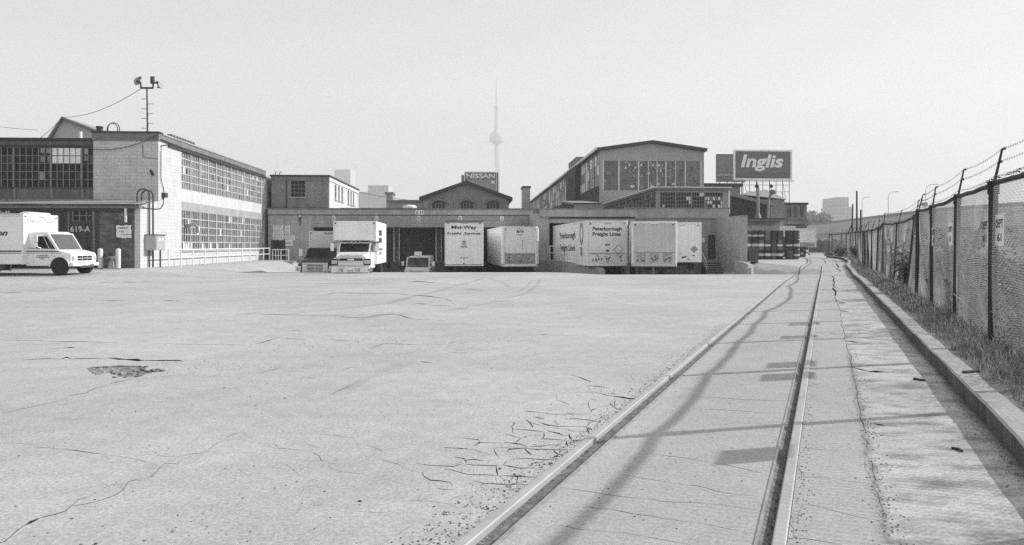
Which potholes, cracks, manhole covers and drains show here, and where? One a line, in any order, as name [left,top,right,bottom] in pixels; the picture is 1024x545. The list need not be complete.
crack [258,281,470,362]
crack [27,347,183,362]
crack [241,374,635,542]
pothole [87,366,166,378]
crack [3,430,245,542]
